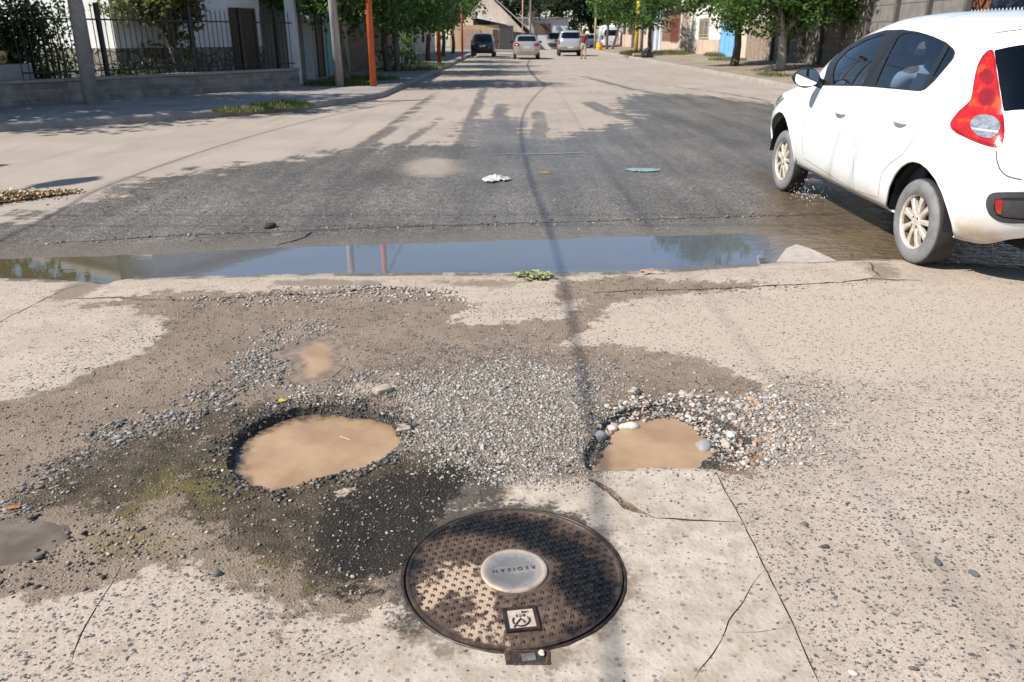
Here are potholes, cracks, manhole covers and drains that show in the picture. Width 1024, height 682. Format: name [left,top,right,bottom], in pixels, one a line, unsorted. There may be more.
manhole cover [401,508,627,666]
pothole [266,334,348,386]
pothole [582,405,759,474]
crack [71,560,123,663]
pothole [227,406,404,490]
crack [695,572,787,677]
crack [592,480,730,522]
